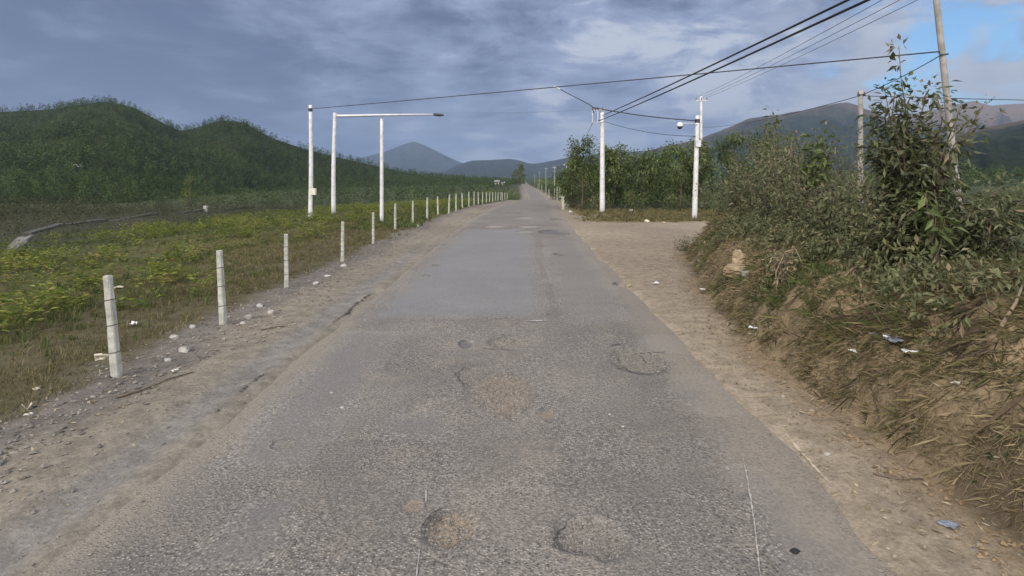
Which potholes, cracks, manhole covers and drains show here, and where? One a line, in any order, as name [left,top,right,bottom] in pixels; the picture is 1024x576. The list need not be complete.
pothole [601,345,686,379]
pothole [541,511,644,571]
crack [336,293,371,321]
pothole [412,506,492,557]
pothole [456,339,477,351]
